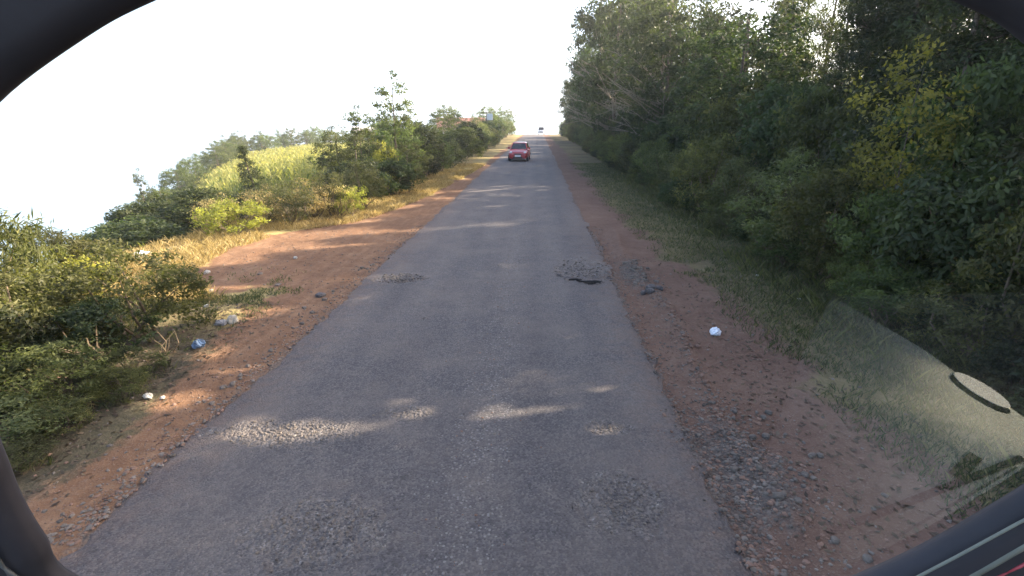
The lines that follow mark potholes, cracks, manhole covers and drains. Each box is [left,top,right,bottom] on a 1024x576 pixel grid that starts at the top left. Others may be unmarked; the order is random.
pothole [552,256,613,285]
pothole [367,272,432,284]
